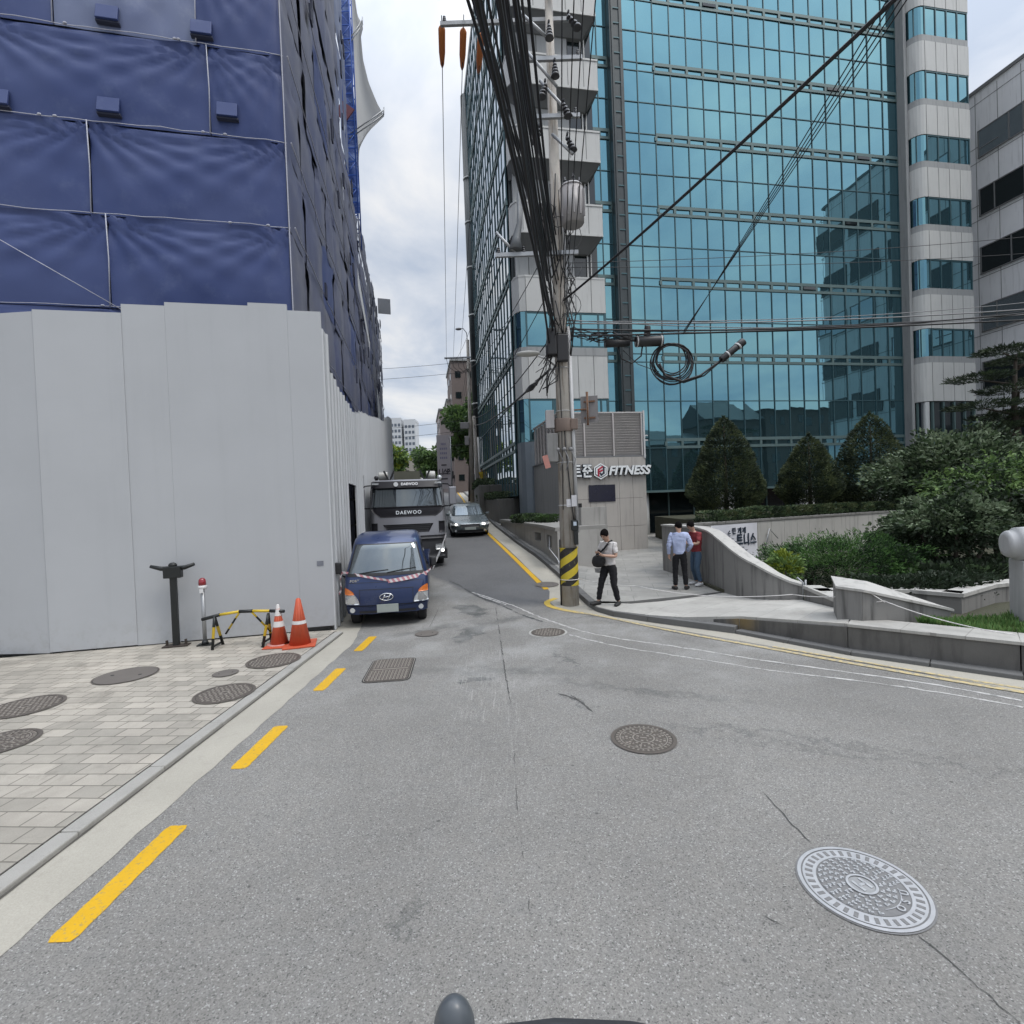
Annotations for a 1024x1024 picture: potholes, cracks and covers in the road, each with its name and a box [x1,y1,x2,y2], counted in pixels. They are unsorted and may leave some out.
manhole cover [0,728,43,752]
manhole cover [91,666,160,685]
crack [557,693,593,712]
manhole cover [212,669,239,677]
crack [762,791,812,843]
crack [496,611,534,937]
manhole cover [245,653,301,668]
crack [918,935,1020,1024]
manhole cover [192,683,256,704]
manhole cover [611,724,677,754]
manhole cover [0,694,67,719]
